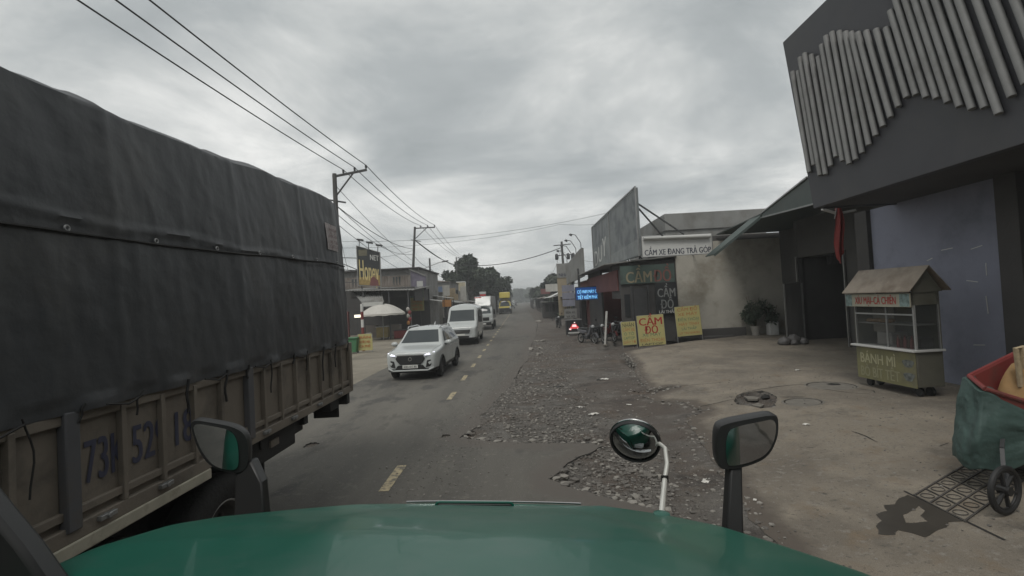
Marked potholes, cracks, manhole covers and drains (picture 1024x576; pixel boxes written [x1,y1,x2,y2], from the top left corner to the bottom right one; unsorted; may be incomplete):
manhole cover [781,397,825,406]
pothole [734,390,777,408]
drain grate [913,465,1024,522]
manhole cover [804,381,859,390]
